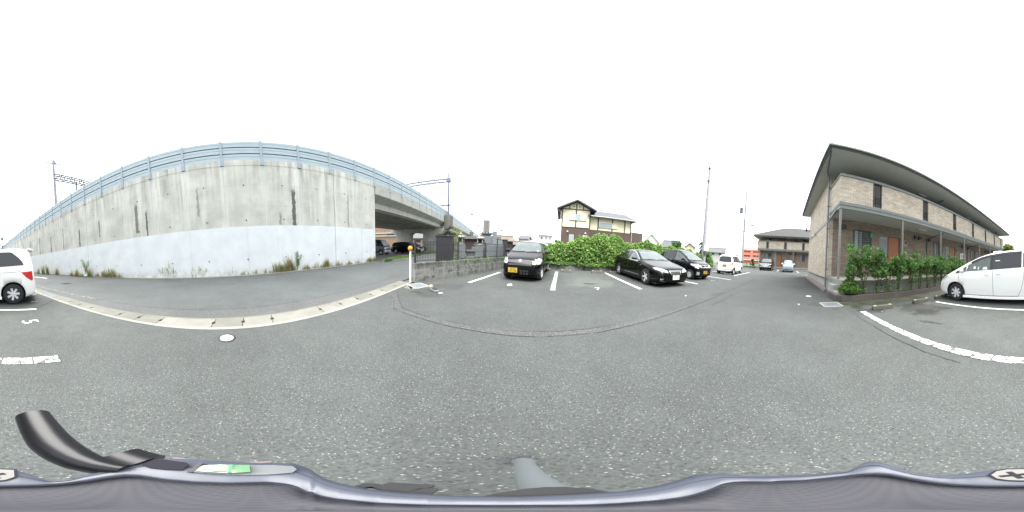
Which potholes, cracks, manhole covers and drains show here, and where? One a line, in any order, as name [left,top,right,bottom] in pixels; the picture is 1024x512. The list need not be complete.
utility cover [218,334,236,342]
